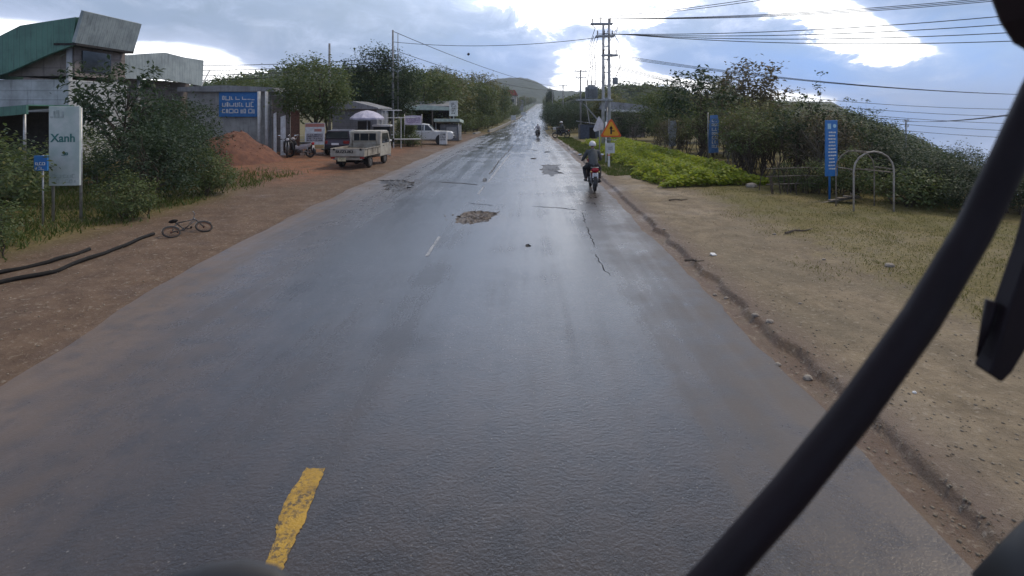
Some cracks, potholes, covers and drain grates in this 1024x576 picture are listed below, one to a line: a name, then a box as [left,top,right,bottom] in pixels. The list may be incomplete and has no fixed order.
pothole [379,179,421,192]
crack [534,206,610,275]
pothole [452,210,500,225]
pothole [540,164,564,176]
